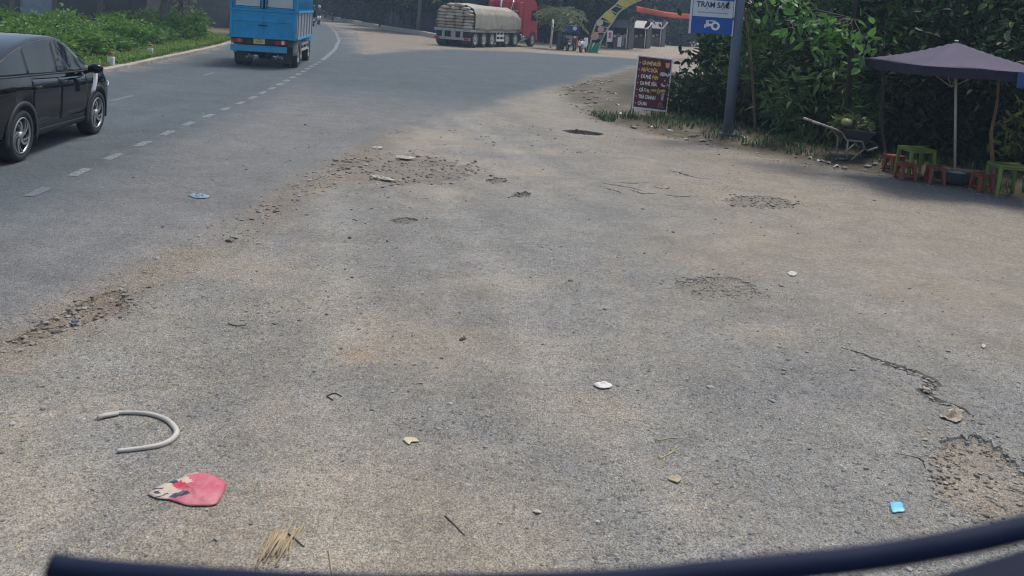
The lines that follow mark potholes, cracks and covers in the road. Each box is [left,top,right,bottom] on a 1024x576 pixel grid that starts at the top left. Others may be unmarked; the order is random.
pothole [1,285,152,353]
pothole [914,419,1024,527]
crack [842,347,979,419]
crack [604,170,711,197]
pothole [312,149,493,188]
pothole [660,272,772,303]
pothole [716,194,800,209]
